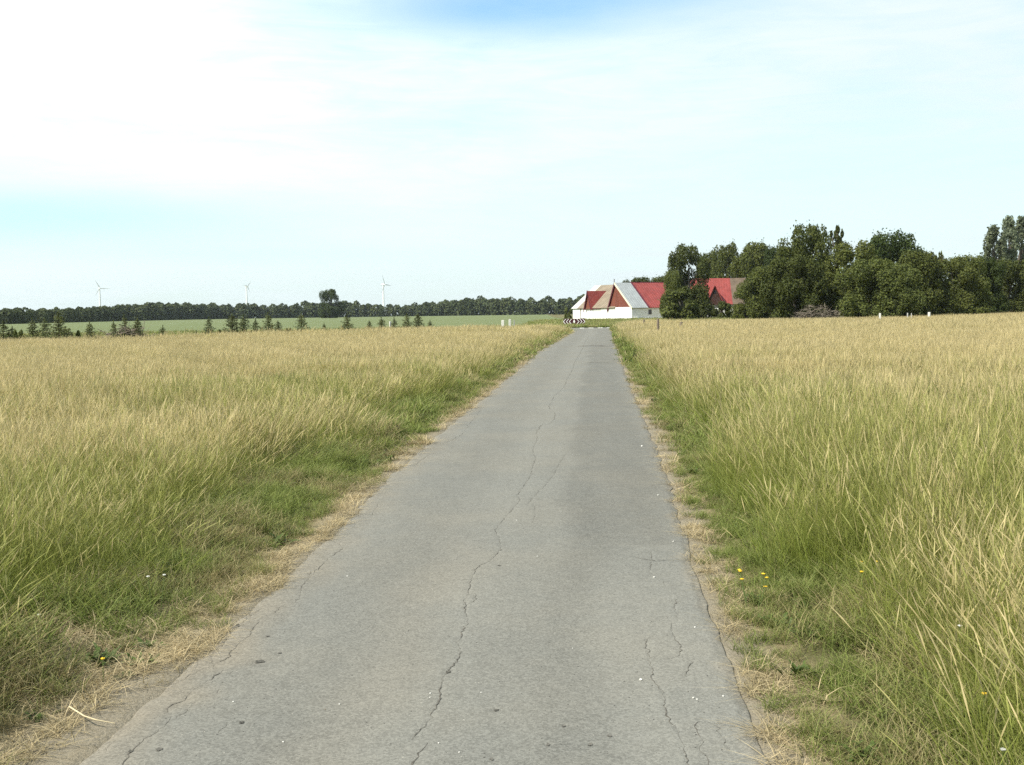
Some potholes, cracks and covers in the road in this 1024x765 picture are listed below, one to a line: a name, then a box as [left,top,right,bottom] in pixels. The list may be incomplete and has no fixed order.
crack [105,541,341,765]
crack [645,636,730,765]
crack [494,345,602,548]
